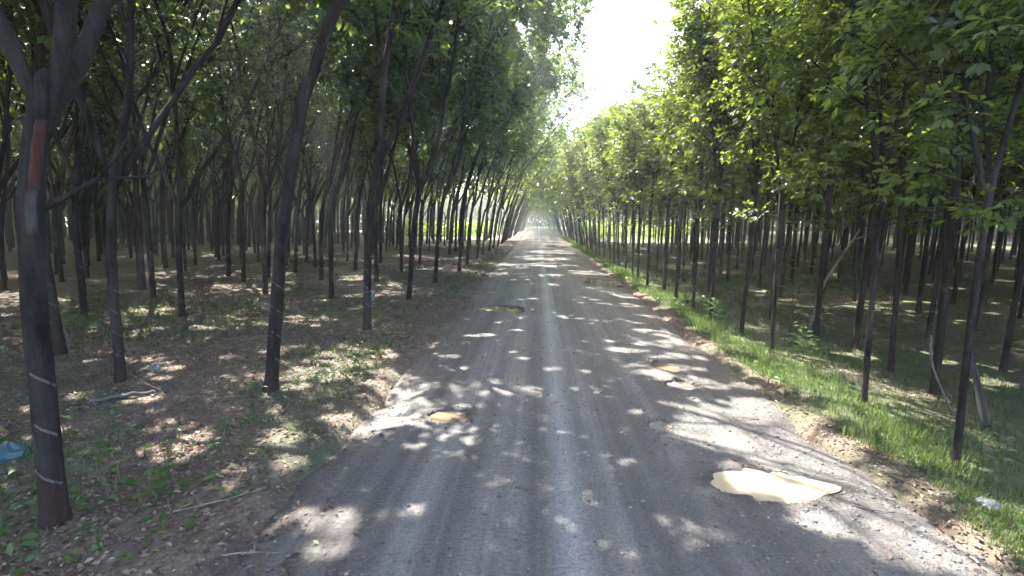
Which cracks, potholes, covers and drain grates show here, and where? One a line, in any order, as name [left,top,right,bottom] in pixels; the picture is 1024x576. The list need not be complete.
pothole [473,304,532,313]
pothole [655,376,709,394]
pothole [676,461,867,512]
pothole [416,403,481,429]
pothole [642,358,692,376]
pothole [580,277,624,288]
